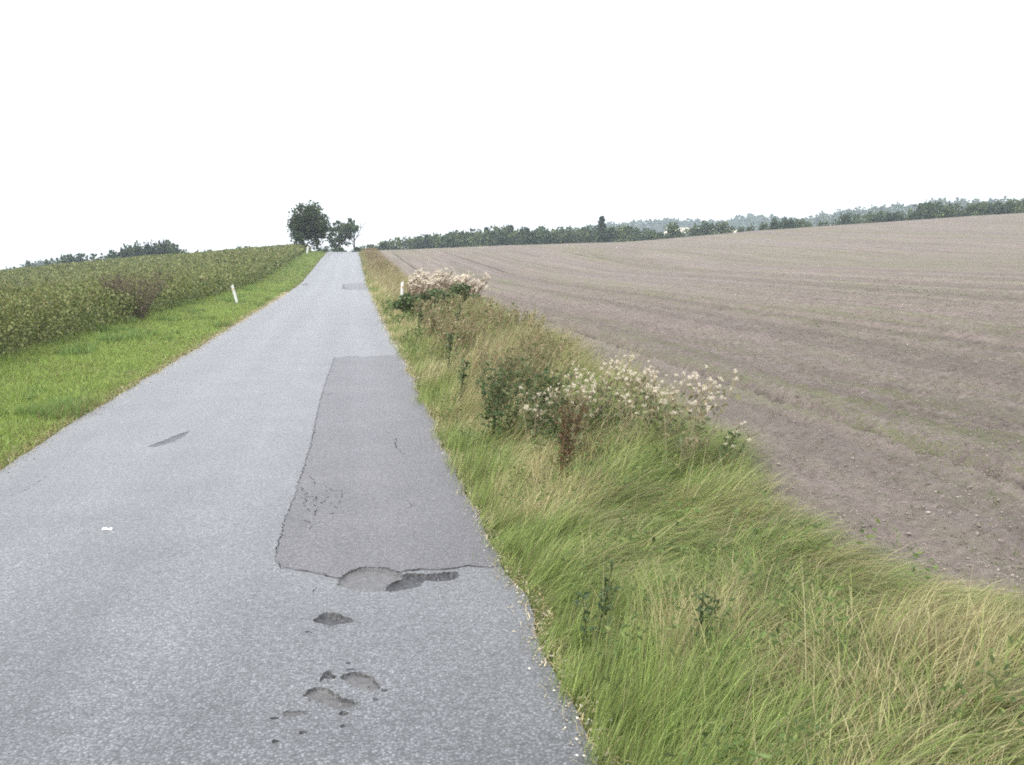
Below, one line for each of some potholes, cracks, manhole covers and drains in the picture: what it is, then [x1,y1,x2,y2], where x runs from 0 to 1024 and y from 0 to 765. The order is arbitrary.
pothole [337,567,402,592]
pothole [303,687,360,710]
pothole [319,671,337,682]
pothole [340,671,380,692]
crack [275,363,340,592]
pothole [313,613,354,626]
pothole [385,572,459,592]
